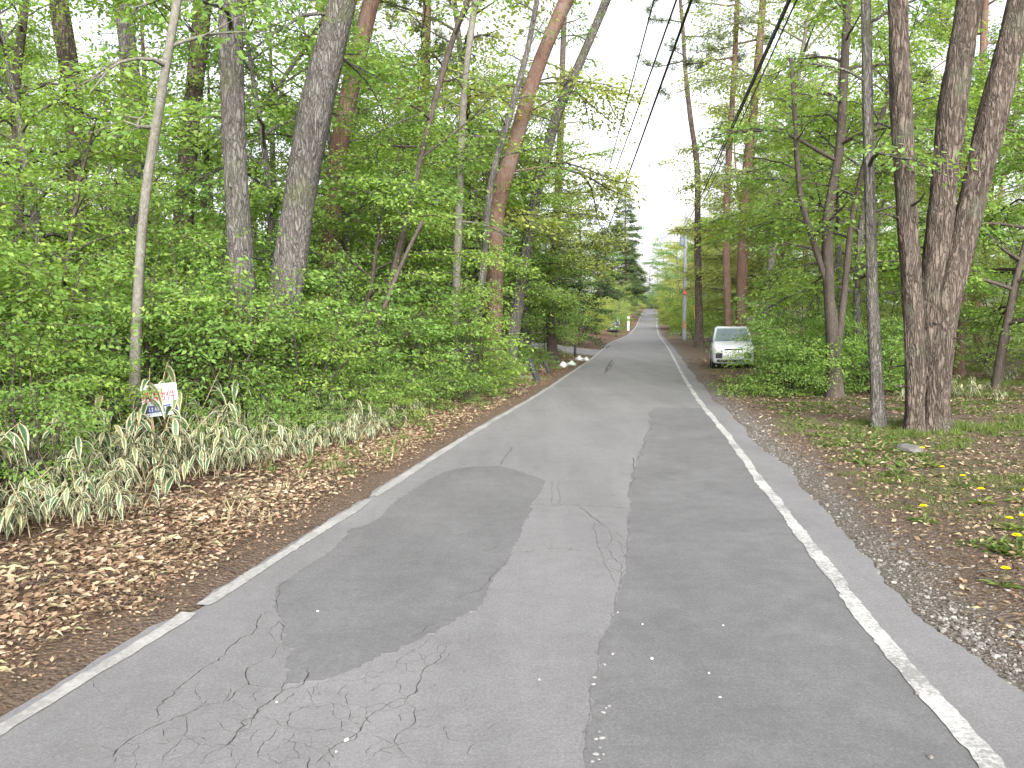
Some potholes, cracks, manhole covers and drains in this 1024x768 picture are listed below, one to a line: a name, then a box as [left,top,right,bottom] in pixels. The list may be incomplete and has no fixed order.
crack [54,543,504,768]
crack [525,508,627,579]
